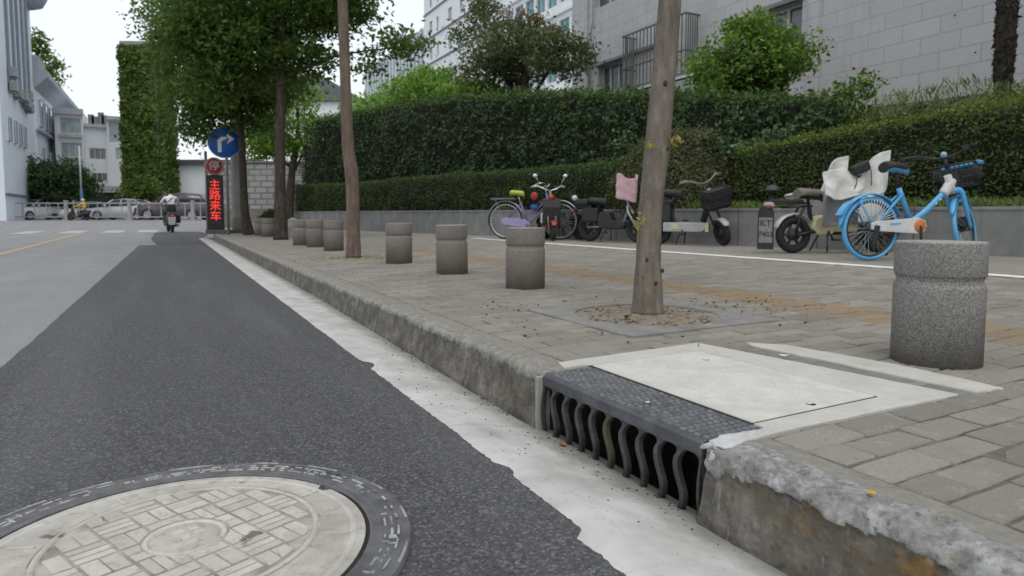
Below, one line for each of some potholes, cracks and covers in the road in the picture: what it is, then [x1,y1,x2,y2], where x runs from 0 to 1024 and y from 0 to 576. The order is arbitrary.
manhole cover [0,462,413,576]
drain grate [535,342,1004,513]
